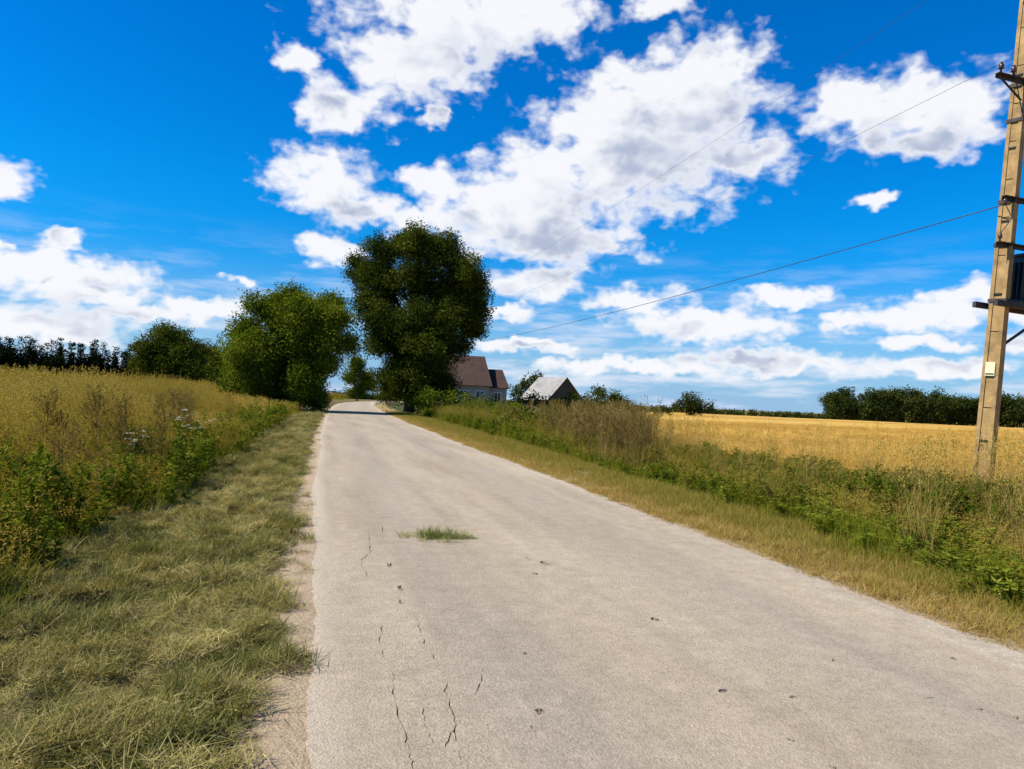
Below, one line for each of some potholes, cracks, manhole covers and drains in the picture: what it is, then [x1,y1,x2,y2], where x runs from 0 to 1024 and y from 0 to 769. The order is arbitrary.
crack [379,625,462,769]
